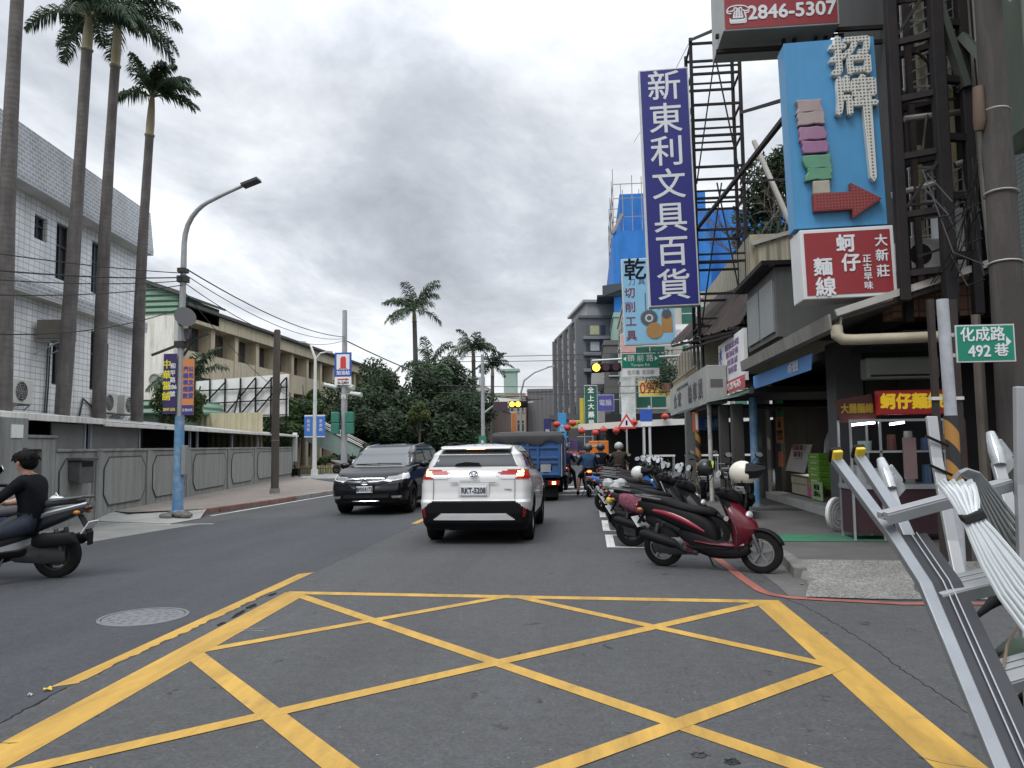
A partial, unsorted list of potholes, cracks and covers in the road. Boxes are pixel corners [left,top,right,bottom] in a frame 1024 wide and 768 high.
crack [782,597,968,713]
manhole cover [96,607,190,627]
